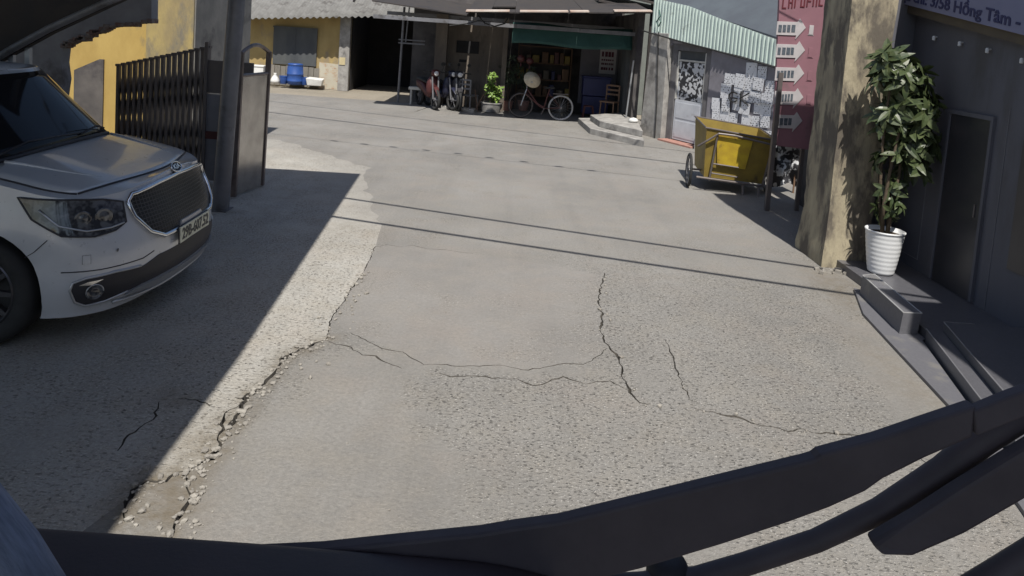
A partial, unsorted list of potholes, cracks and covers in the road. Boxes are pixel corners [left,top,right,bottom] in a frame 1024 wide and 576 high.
crack [123,245,645,538]
crack [666,342,857,436]
